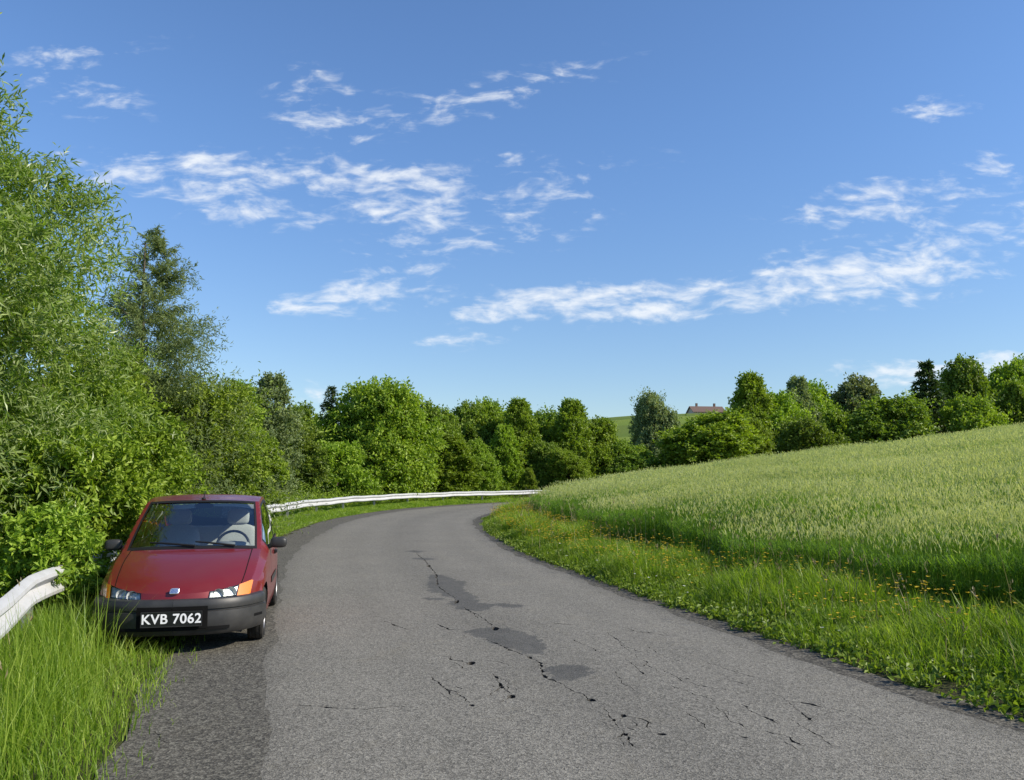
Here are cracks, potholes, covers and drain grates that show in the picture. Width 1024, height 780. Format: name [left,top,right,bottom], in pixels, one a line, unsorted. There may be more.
crack [574,629,866,750]
crack [414,551,665,747]
